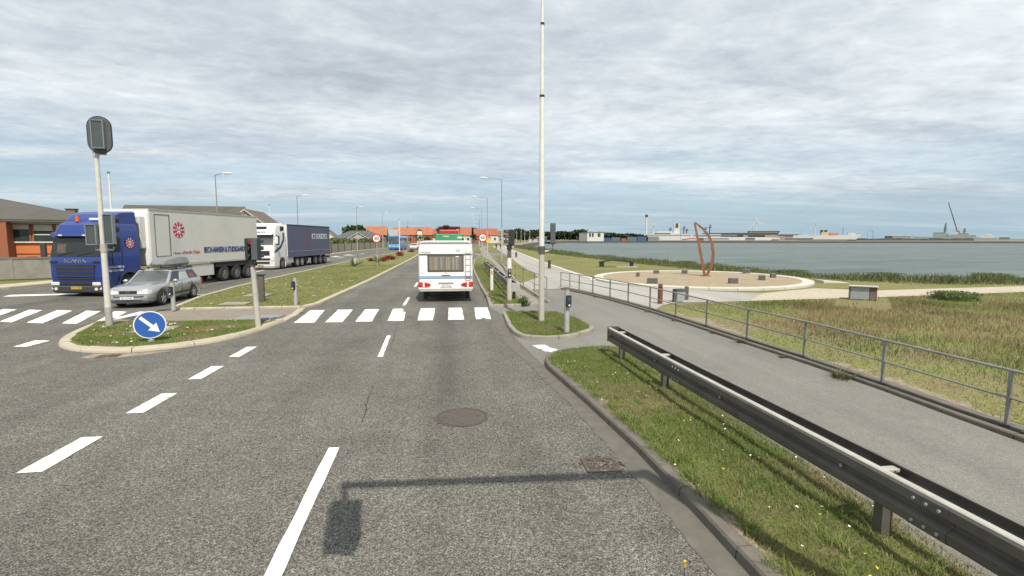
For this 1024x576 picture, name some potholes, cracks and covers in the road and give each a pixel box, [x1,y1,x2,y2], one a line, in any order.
drain grate [566,455,625,473]
manhole cover [435,408,489,427]
